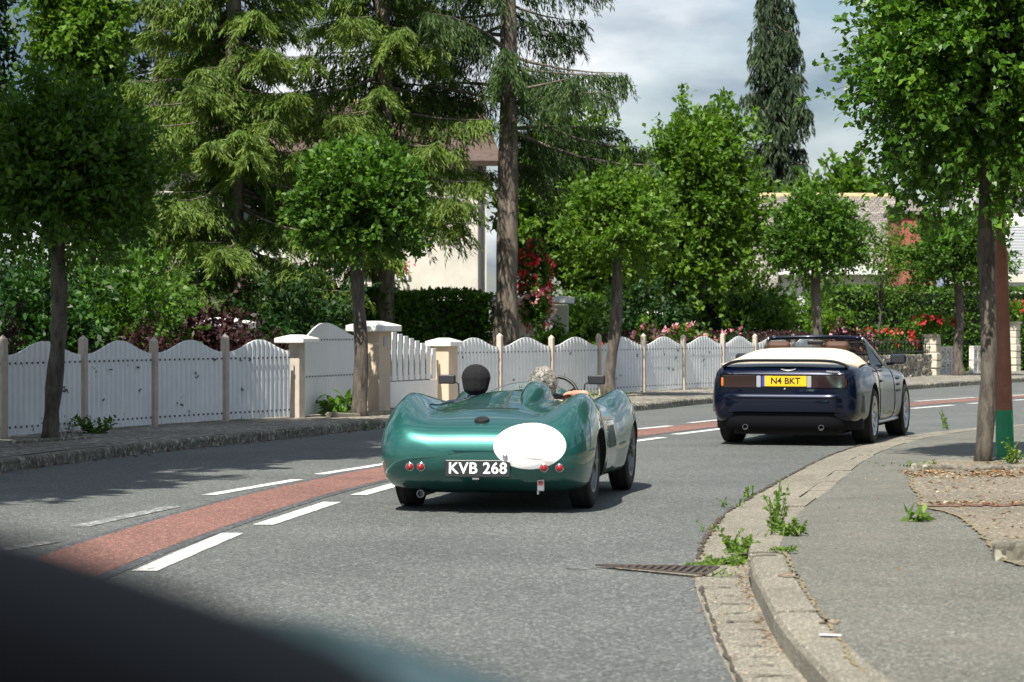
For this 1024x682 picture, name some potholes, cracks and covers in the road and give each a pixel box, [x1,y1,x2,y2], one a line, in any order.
drain grate [595,564,727,576]
